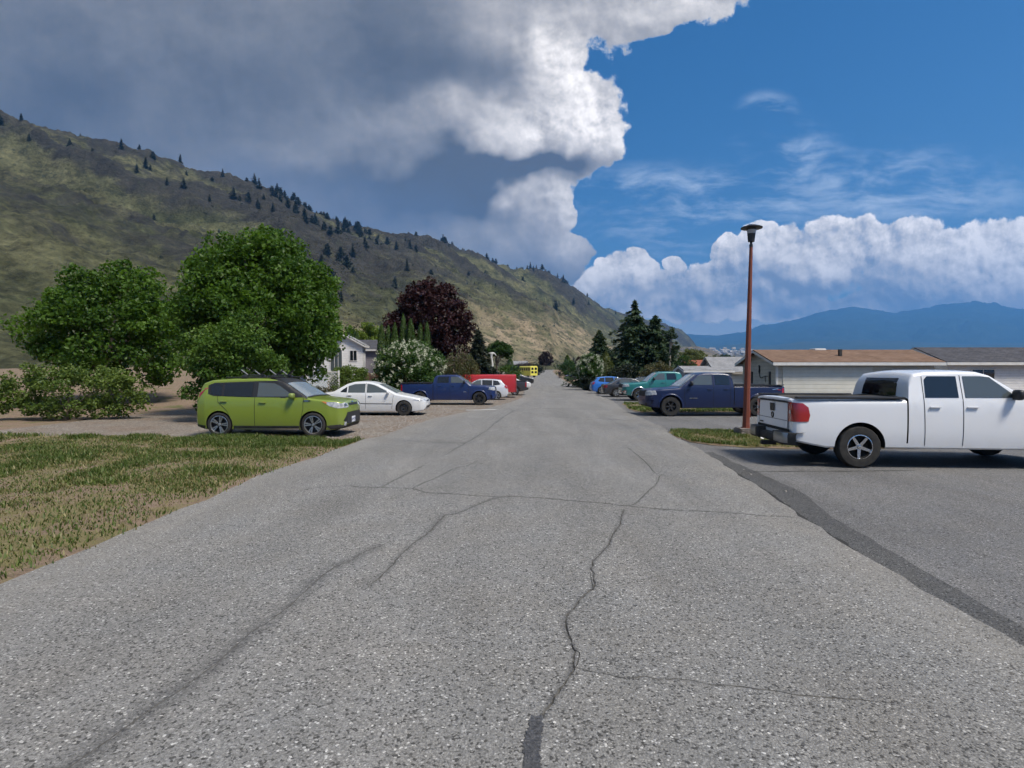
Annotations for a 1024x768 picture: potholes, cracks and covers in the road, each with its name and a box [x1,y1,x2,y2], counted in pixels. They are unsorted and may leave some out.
crack [300,448,907,716]
